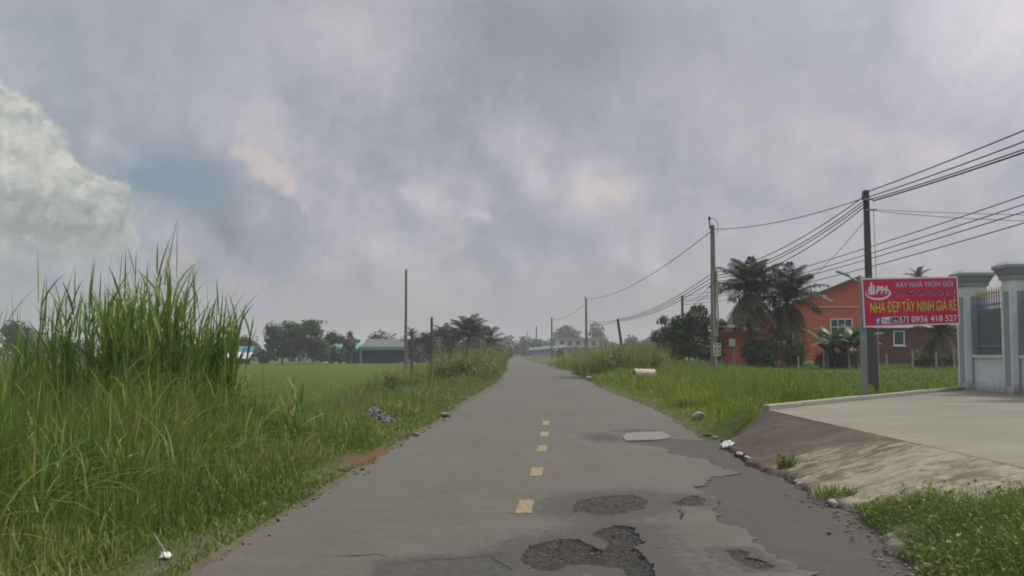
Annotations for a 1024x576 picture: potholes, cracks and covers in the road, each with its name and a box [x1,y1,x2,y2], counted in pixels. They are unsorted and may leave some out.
pothole [724,549,775,570]
pothole [520,525,656,576]
pothole [571,494,648,515]
pothole [672,495,706,506]
